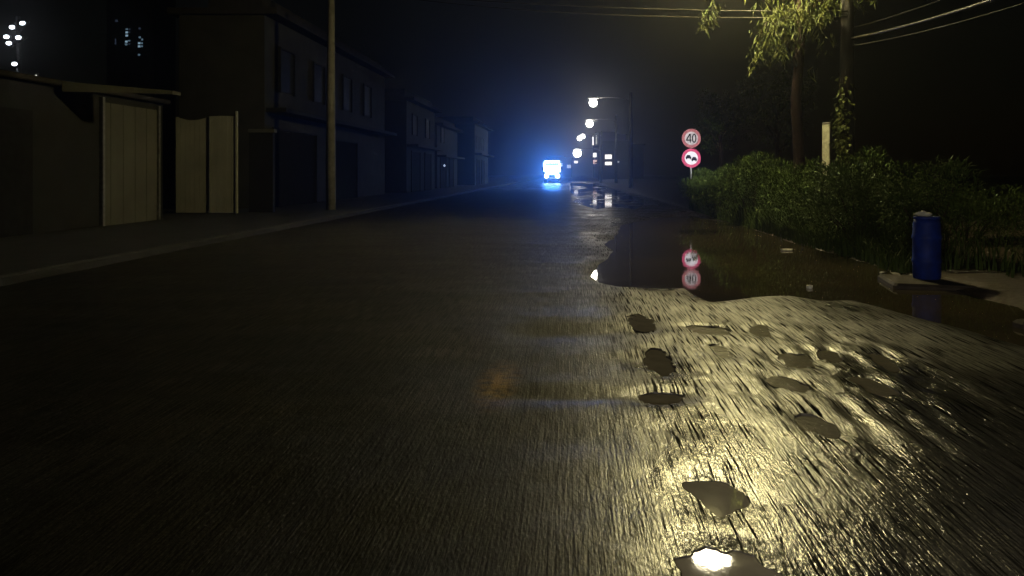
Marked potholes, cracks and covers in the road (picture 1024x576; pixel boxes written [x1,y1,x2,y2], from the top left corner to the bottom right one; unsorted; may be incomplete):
pothole [643,348,677,377]
pothole [627,313,656,333]
pothole [794,413,841,439]
pothole [685,325,731,335]
pothole [776,353,815,369]
pothole [816,350,843,363]
pothole [765,376,812,393]
pothole [682,480,750,518]
pothole [638,392,685,405]
pothole [848,377,900,398]
pothole [673,546,784,576]
pothole [749,324,772,337]
